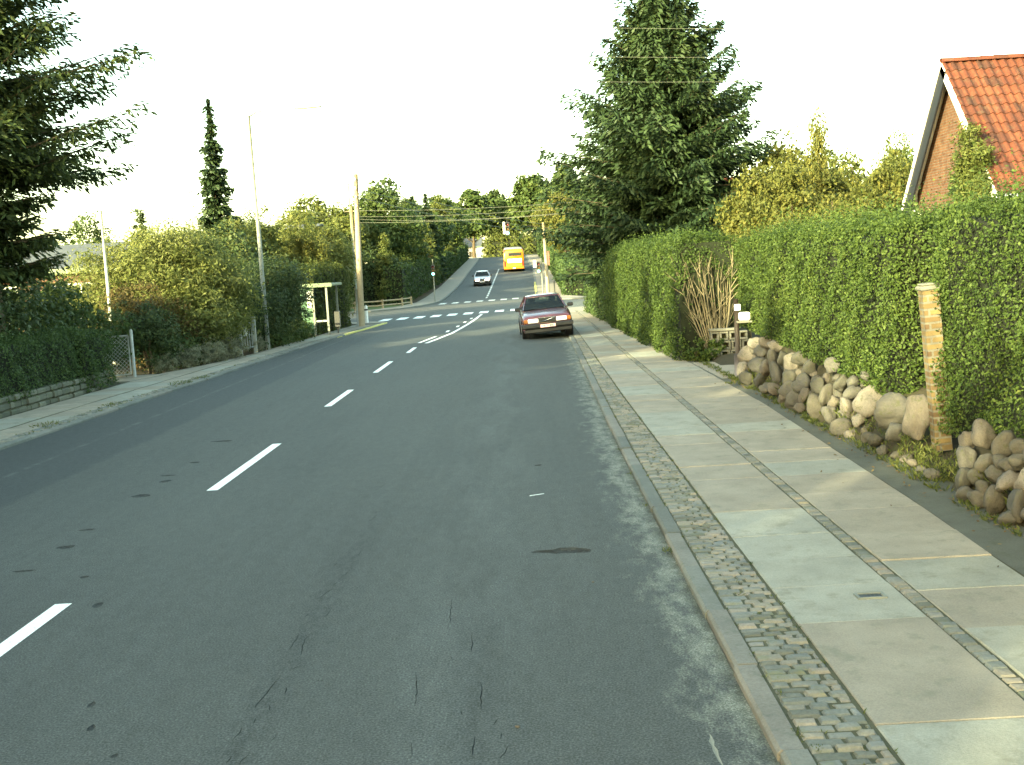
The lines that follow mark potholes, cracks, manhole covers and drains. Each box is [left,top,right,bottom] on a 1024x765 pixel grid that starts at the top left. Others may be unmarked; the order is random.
crack [227,484,385,763]
crack [411,600,508,758]
